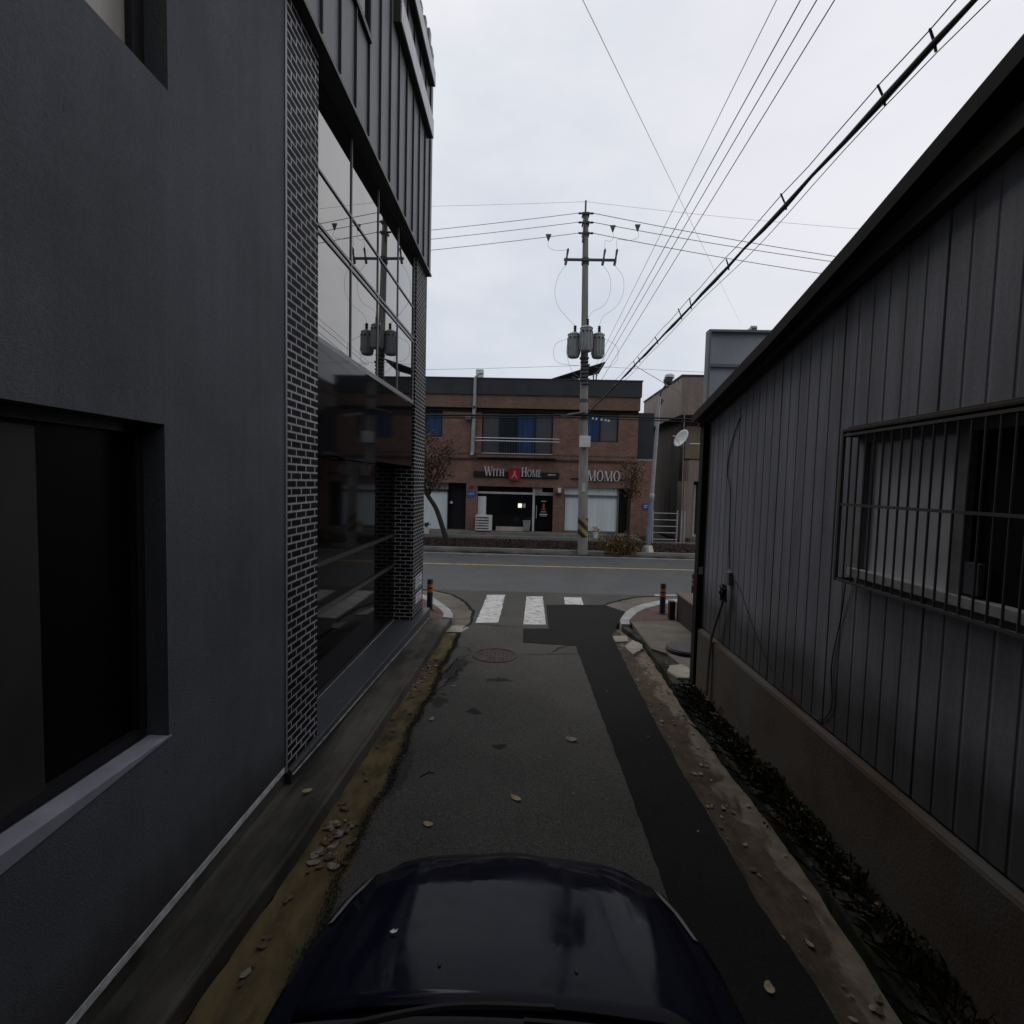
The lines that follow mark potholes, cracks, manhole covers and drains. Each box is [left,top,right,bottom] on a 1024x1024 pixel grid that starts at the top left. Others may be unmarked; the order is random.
manhole cover [472,648,518,663]
manhole cover [666,641,691,657]
crack [436,647,470,696]
